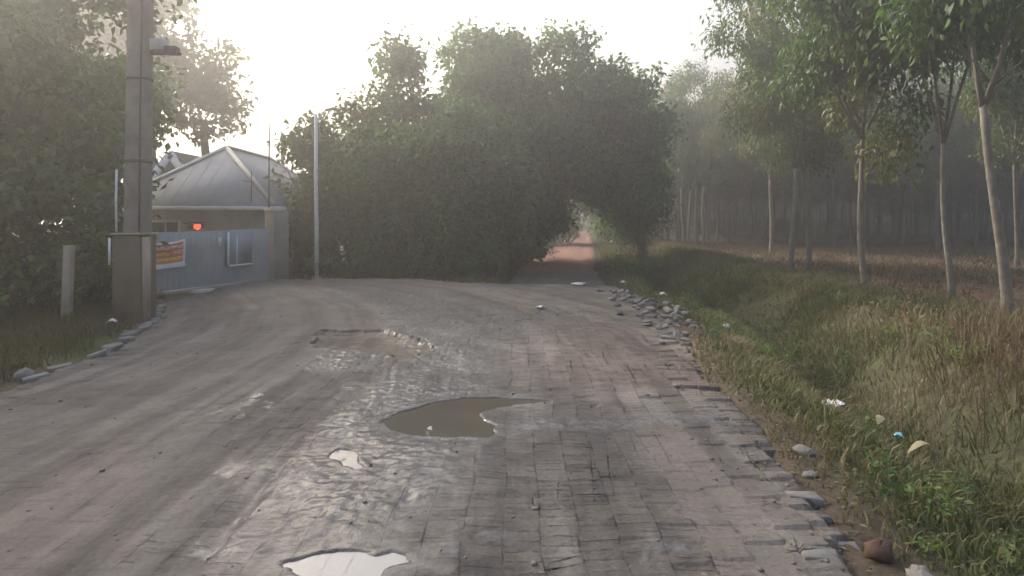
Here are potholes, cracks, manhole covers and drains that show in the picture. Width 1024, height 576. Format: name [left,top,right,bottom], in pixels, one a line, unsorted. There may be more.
pothole [307,328,441,359]
pothole [324,446,369,471]
pothole [269,544,419,576]
pothole [374,396,562,440]
